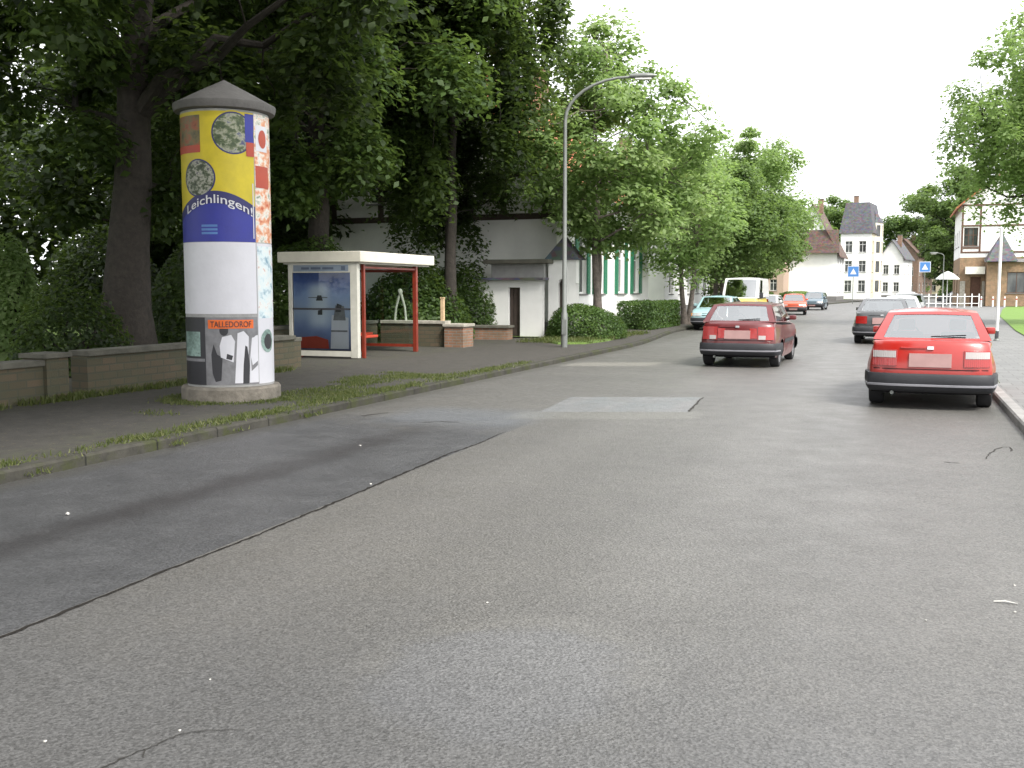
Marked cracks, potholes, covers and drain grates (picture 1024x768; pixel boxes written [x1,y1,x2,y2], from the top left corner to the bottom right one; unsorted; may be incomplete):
crack [100,728,242,768]
